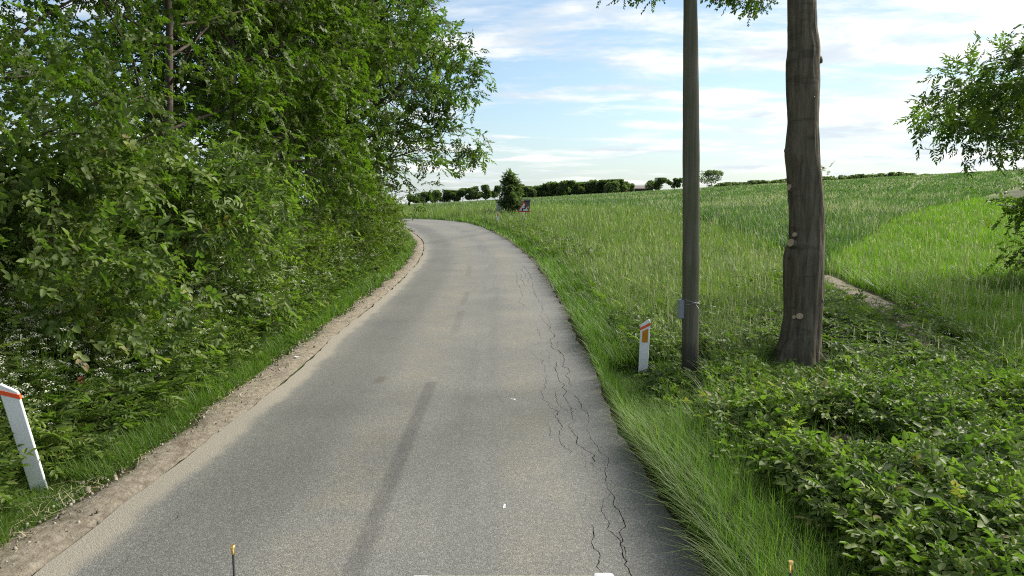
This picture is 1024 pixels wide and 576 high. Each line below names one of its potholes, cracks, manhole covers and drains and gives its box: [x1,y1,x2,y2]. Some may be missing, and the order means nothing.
crack [539,306,632,576]
